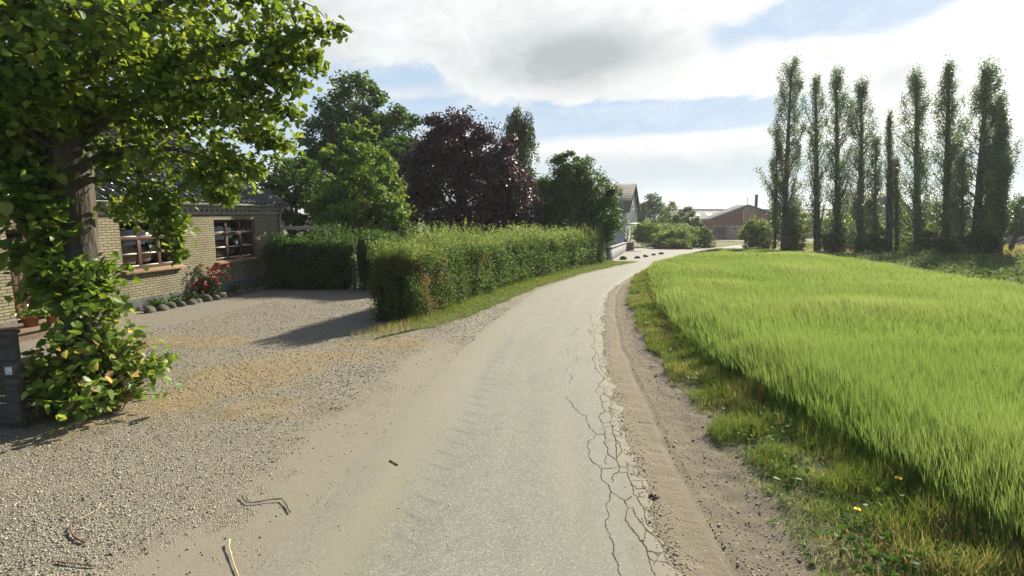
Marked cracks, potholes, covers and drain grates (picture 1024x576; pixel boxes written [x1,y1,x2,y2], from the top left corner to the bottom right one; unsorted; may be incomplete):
crack [566,333,677,576]
